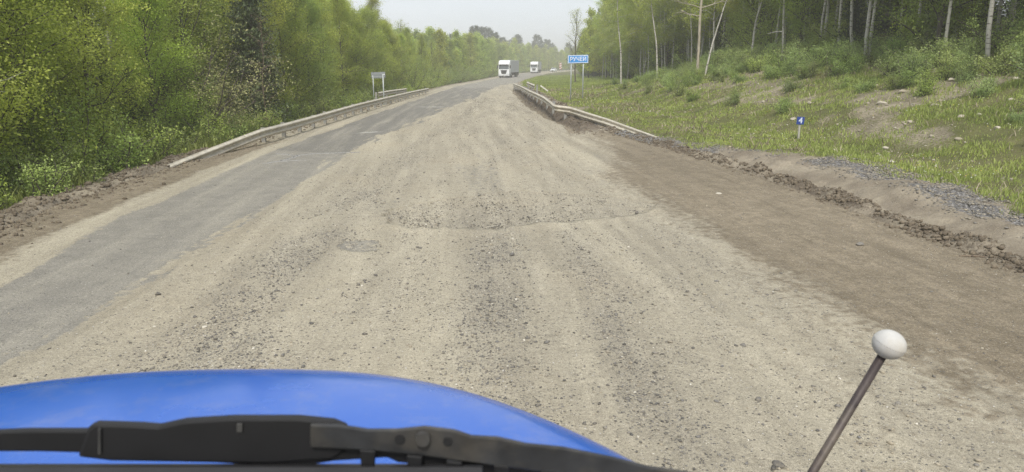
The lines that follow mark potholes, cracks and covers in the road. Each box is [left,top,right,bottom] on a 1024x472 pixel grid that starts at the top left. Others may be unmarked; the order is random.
pothole [337,239,381,252]
